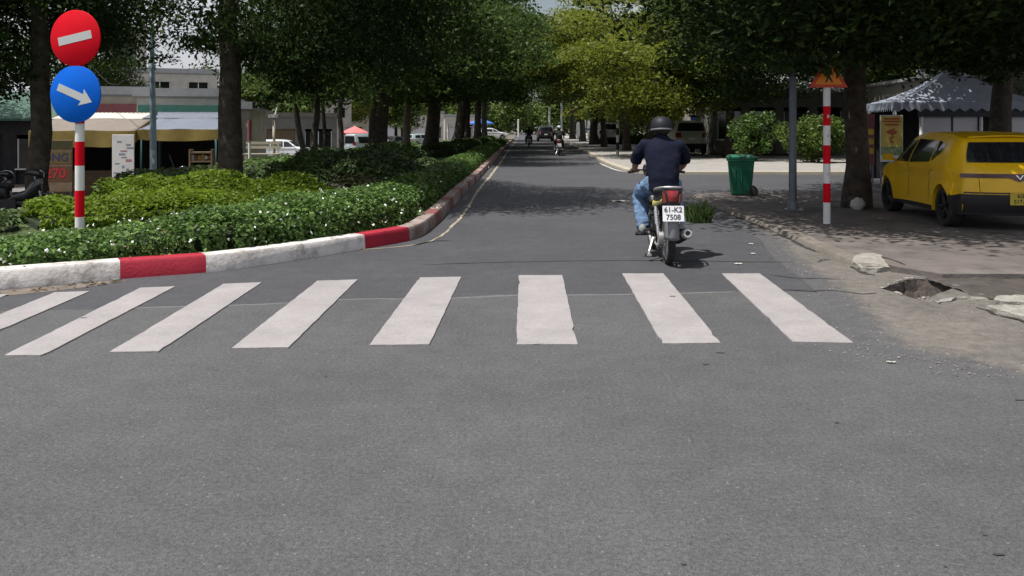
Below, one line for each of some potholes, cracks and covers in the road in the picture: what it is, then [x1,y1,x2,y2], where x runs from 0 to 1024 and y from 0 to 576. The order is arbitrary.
pothole [880,277,952,300]
